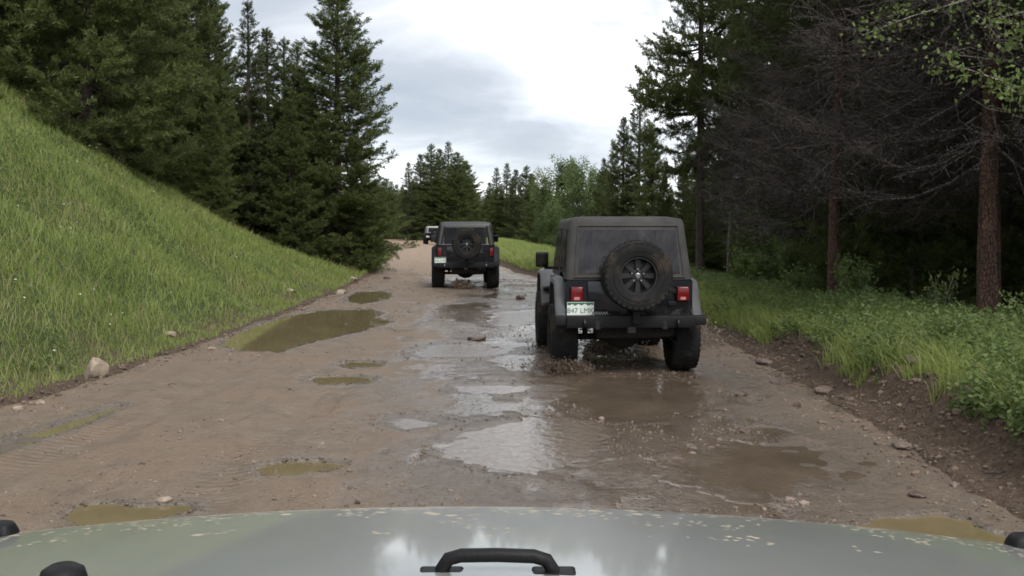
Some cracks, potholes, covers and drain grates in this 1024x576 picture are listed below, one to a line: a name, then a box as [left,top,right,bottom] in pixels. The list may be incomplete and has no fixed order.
pothole [427,379,554,396]
pothole [413,415,625,484]
pothole [300,374,383,385]
pothole [849,510,1011,544]
pothole [53,498,214,528]
pothole [233,455,353,479]
pothole [328,359,390,369]
pothole [343,290,395,304]
pothole [368,410,478,434]
pothole [215,308,396,353]
